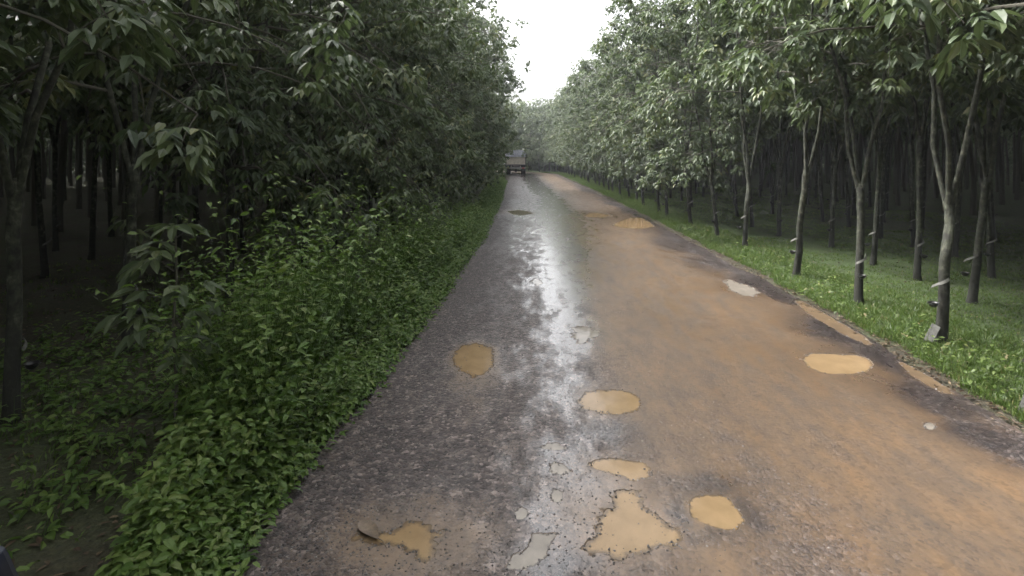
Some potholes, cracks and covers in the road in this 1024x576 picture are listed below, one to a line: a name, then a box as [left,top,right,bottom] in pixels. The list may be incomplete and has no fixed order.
pothole [687,493,746,530]
pothole [612,217,656,229]
pothole [801,353,874,375]
pothole [588,457,656,481]
pothole [350,518,451,564]
pothole [581,485,689,564]
pothole [449,343,497,379]
pothole [573,387,642,416]
